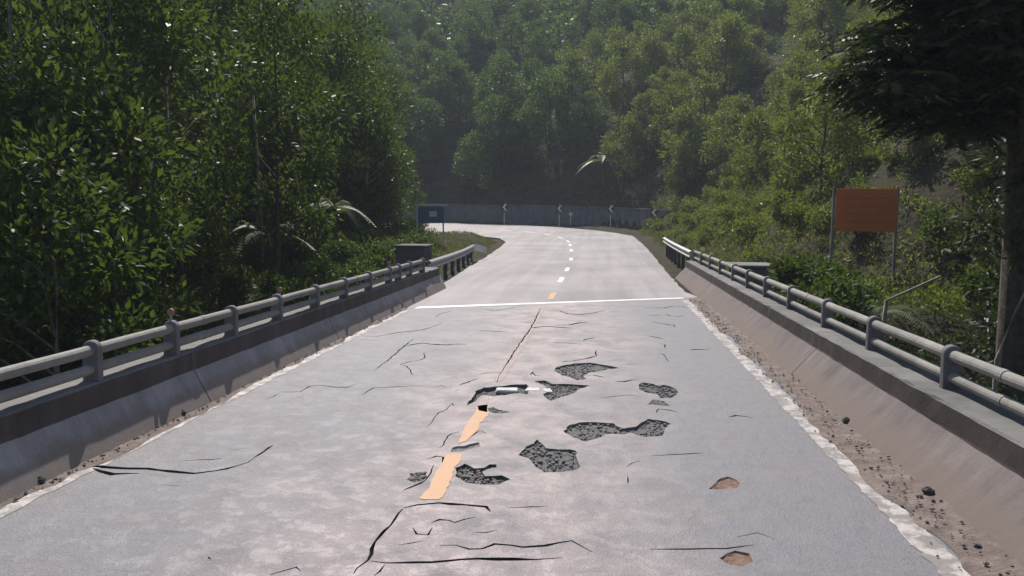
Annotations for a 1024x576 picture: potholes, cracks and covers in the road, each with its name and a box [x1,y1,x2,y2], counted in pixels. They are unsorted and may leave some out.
pothole [555,363,617,380]
pothole [519,439,580,472]
pothole [407,471,427,482]
pothole [467,384,553,405]
pothole [455,464,509,485]
pothole [564,419,671,442]
crack [267,306,635,576]
pothole [535,380,590,401]
pothole [639,382,678,398]
crack [94,445,273,486]
